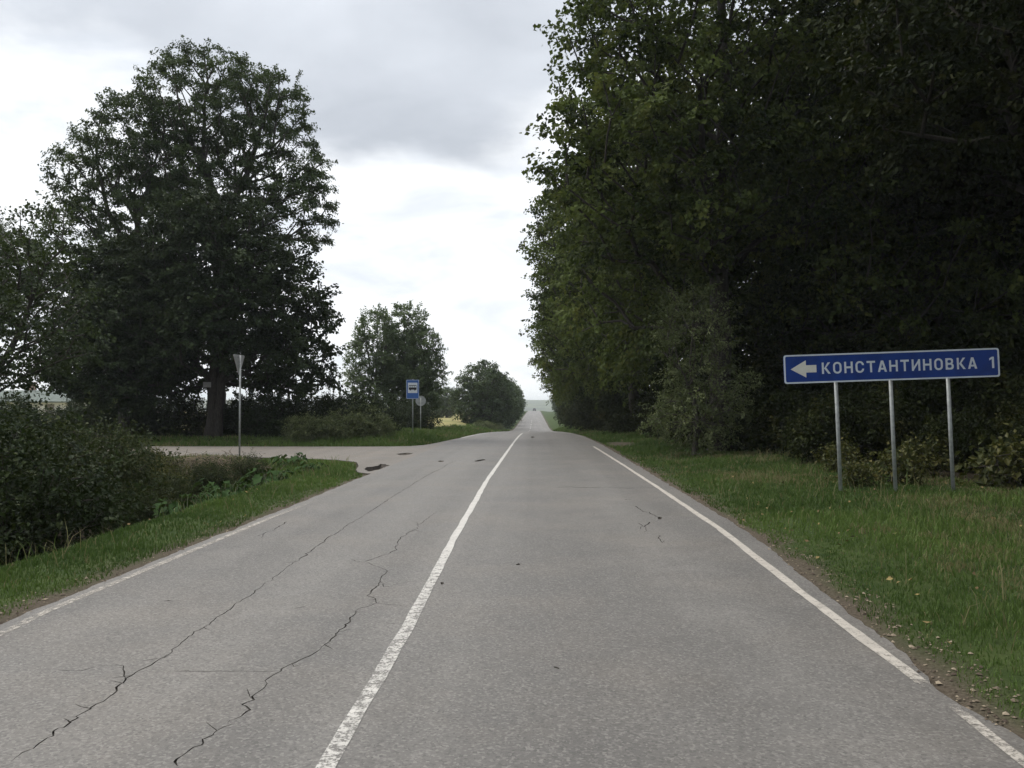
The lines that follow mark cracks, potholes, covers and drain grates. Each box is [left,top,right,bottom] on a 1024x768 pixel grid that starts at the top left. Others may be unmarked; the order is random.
crack [10,462,453,762]
